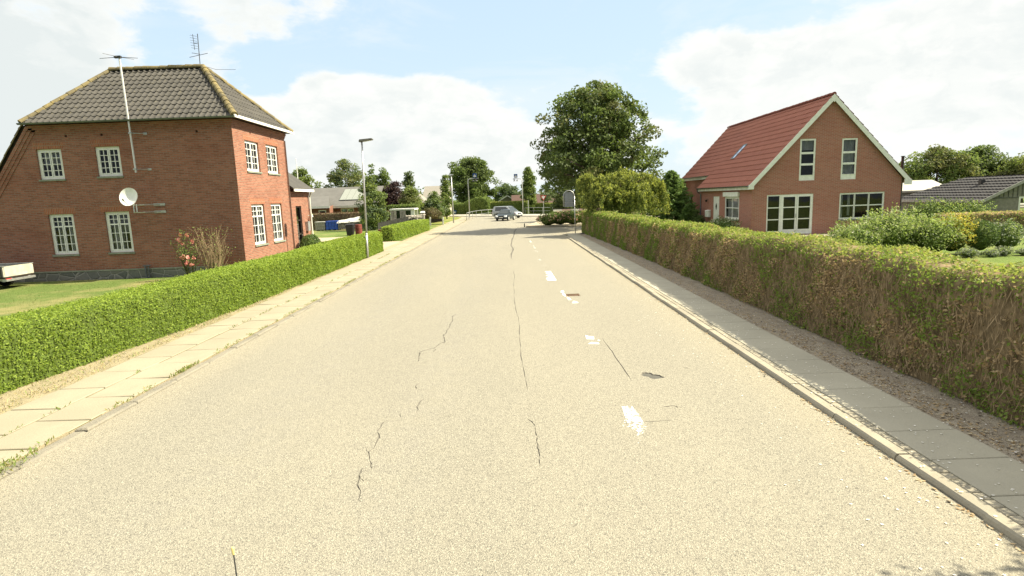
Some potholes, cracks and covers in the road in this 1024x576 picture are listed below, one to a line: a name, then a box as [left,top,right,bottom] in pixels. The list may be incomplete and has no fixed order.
crack [418,314,456,361]
crack [513,272,528,390]
crack [356,383,424,503]
